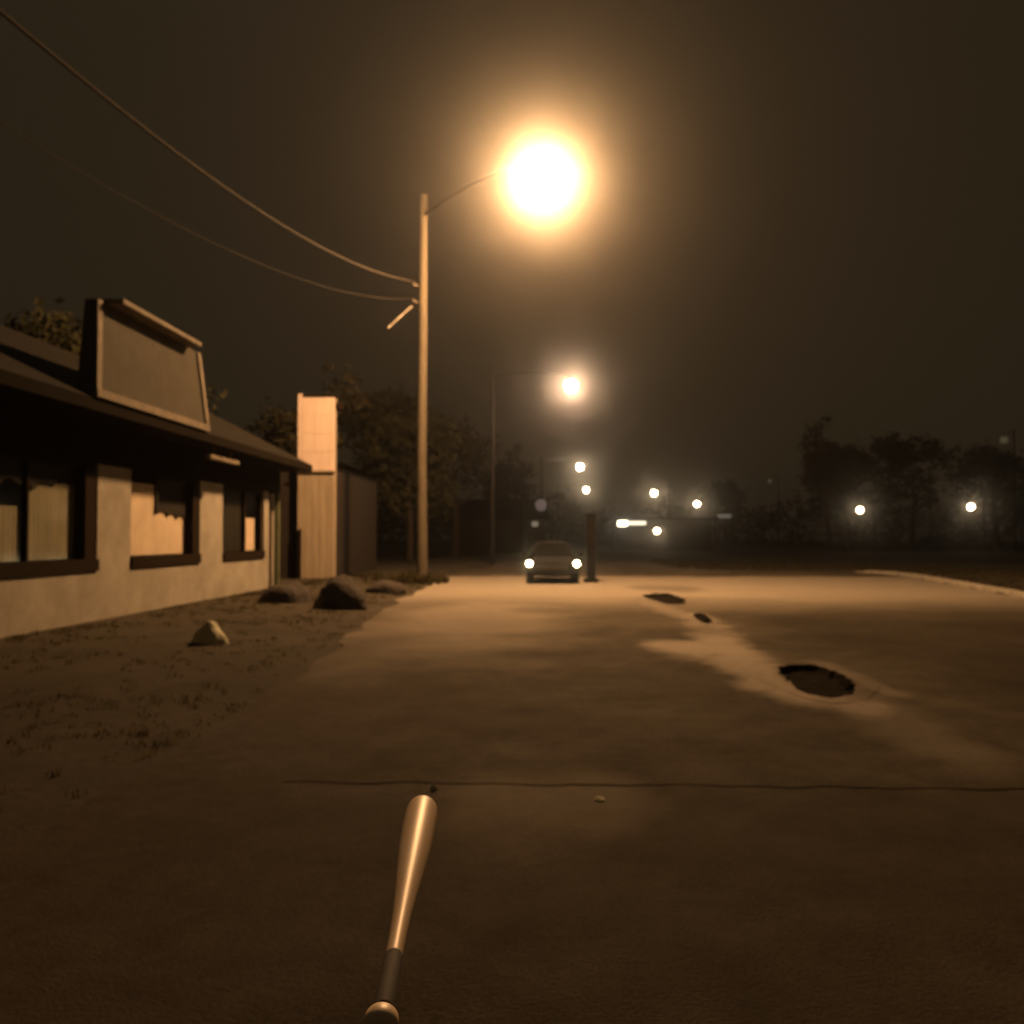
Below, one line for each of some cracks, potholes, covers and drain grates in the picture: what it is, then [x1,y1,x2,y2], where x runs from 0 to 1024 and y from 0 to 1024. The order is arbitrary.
crack [307,781,1024,791]
pothole [755,662,883,704]
pothole [636,593,695,606]
